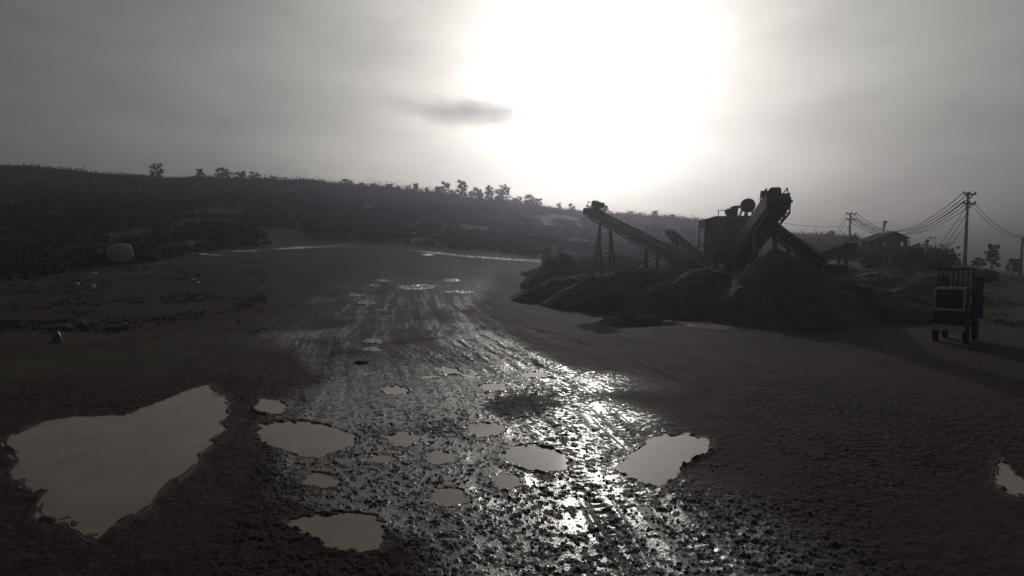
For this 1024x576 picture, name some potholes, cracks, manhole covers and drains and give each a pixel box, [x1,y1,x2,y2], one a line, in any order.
pothole [253,419,362,458]
pothole [487,472,526,493]
pothole [419,449,461,465]
pothole [0,384,232,544]
pothole [611,431,714,489]
pothole [383,430,423,448]
pothole [377,385,414,395]
pothole [476,382,511,393]
pothole [423,486,474,508]
pothole [461,421,510,438]
pothole [494,442,576,475]
pothole [250,398,292,416]
